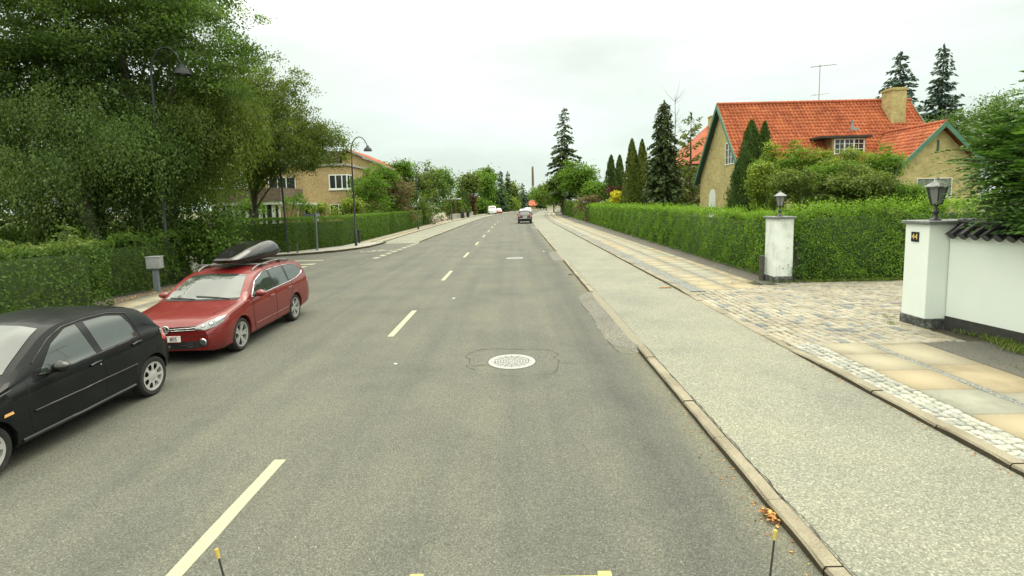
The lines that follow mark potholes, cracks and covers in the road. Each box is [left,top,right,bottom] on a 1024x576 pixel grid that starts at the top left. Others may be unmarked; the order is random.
manhole cover [487,354,537,370]
